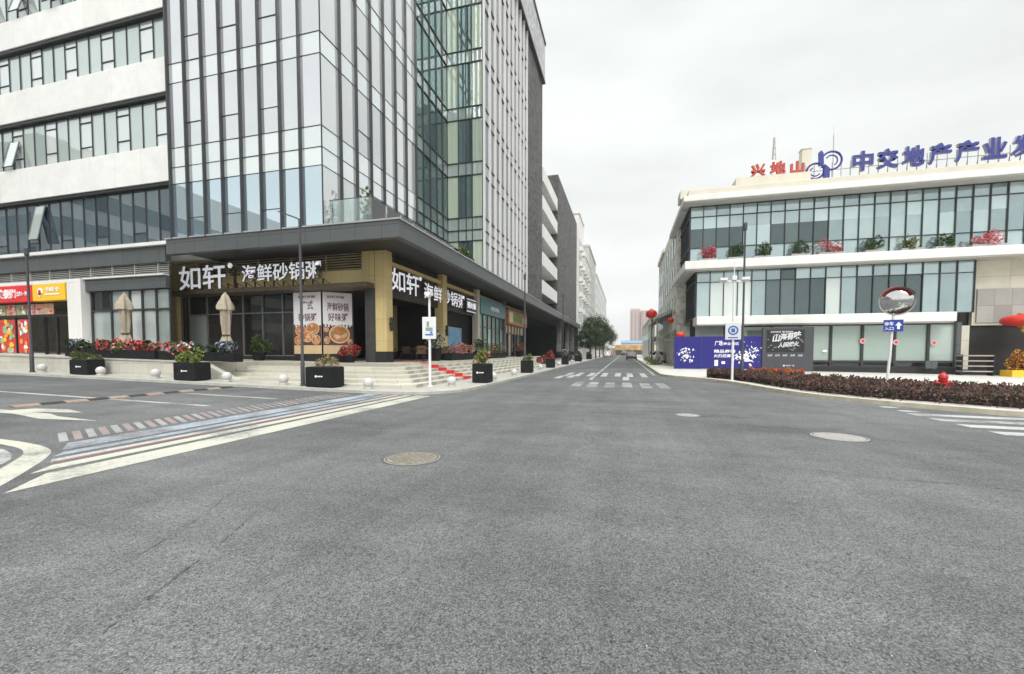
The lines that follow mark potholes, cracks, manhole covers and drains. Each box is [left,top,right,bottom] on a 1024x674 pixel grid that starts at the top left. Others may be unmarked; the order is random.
manhole cover [380,451,442,466]
manhole cover [808,432,873,442]
